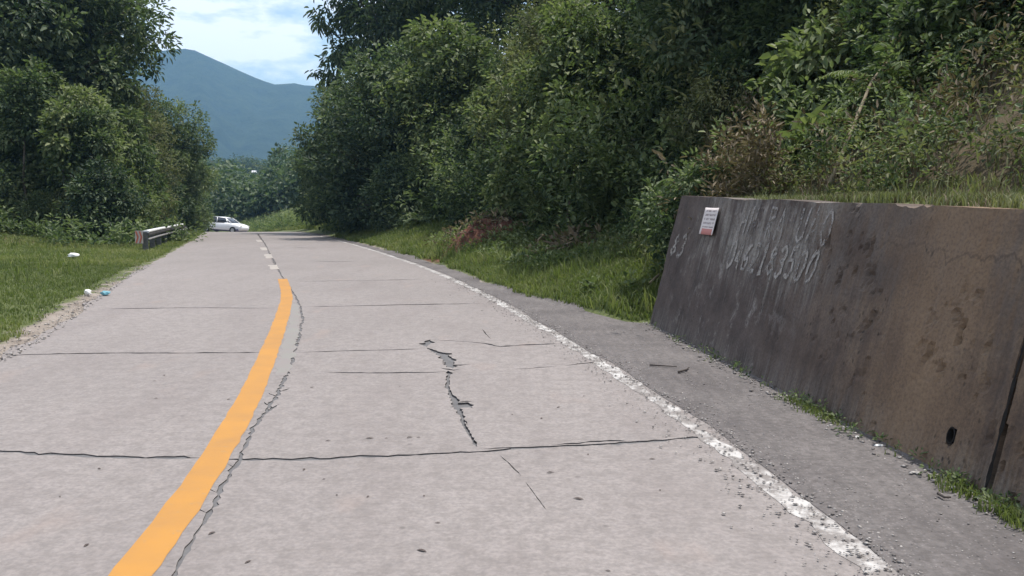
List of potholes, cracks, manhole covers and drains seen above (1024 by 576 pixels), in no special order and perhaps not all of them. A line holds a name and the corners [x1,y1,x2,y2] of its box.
crack [2,234,692,576]
